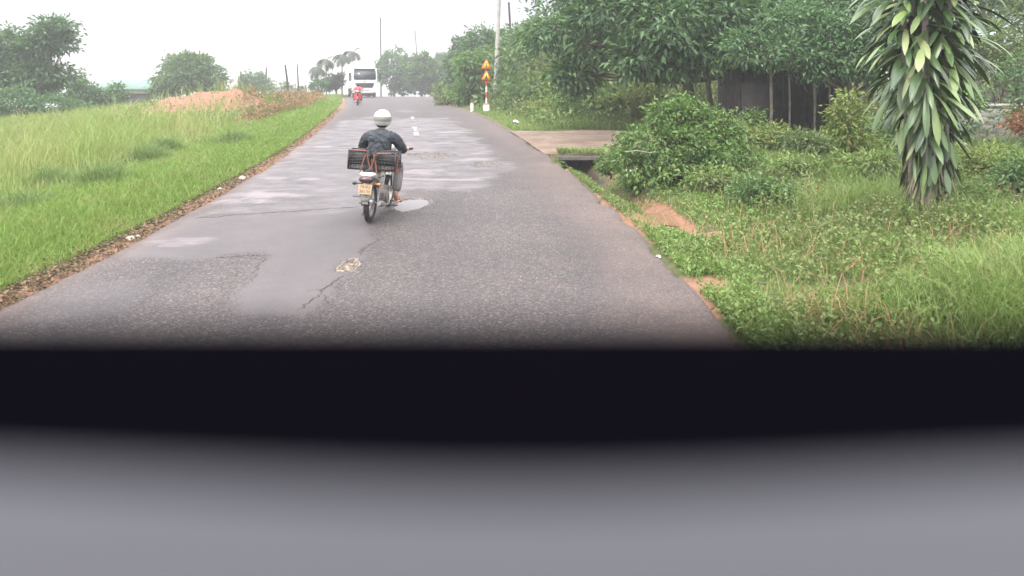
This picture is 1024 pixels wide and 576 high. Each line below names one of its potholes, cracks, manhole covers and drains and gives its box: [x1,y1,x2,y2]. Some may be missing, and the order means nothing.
pothole [336,257,361,272]
pothole [390,197,434,213]
crack [295,238,378,310]
